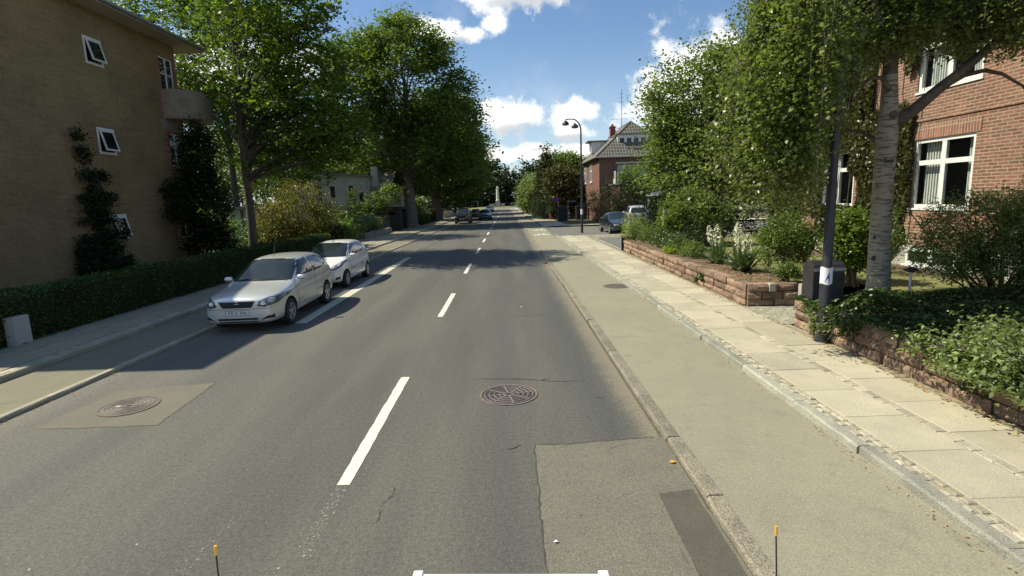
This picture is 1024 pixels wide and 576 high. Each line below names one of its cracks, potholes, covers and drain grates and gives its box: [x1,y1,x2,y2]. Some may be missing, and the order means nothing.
manhole cover [95,396,161,417]
manhole cover [480,384,538,406]
